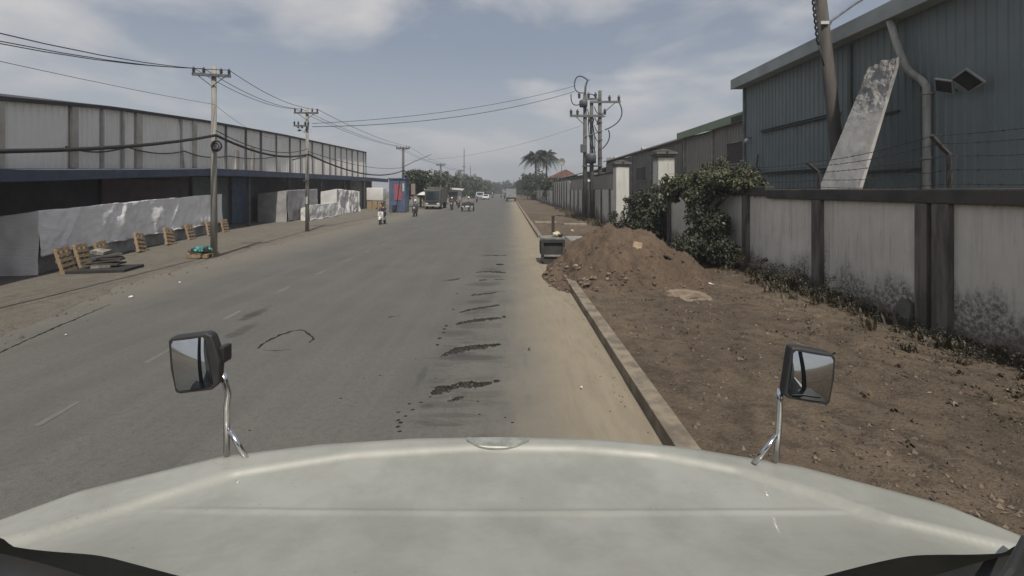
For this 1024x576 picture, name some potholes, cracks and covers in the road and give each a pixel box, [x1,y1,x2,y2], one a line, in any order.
crack [0,304,110,353]
pothole [441,343,501,357]
pothole [430,381,493,395]
crack [257,329,315,351]
pothole [456,317,501,325]
